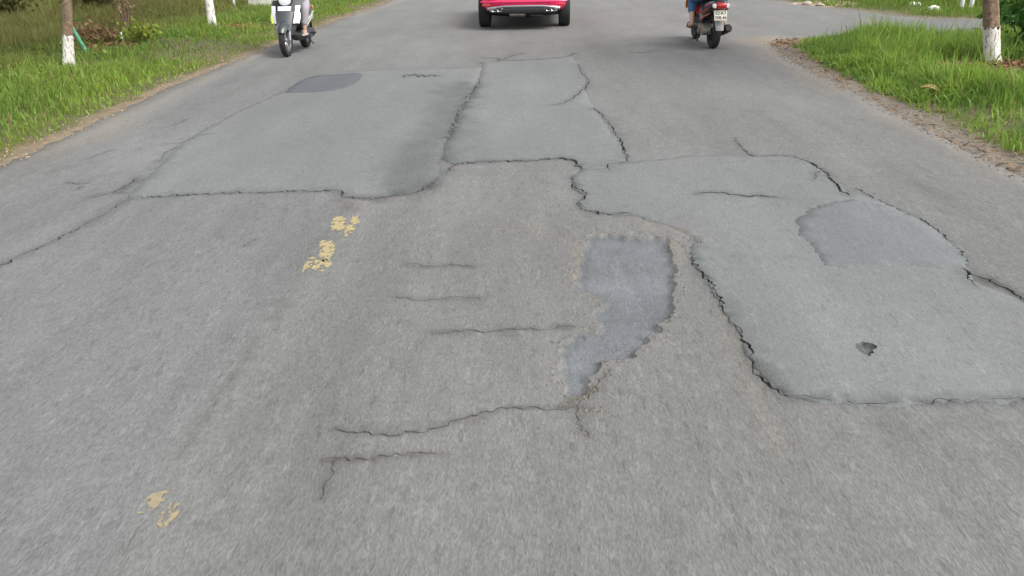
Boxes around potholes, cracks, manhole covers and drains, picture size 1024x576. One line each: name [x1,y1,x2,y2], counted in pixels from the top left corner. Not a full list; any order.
crack [0,157,628,265]
crack [434,325,573,334]
pothole [855,342,877,356]
crack [320,370,610,500]
